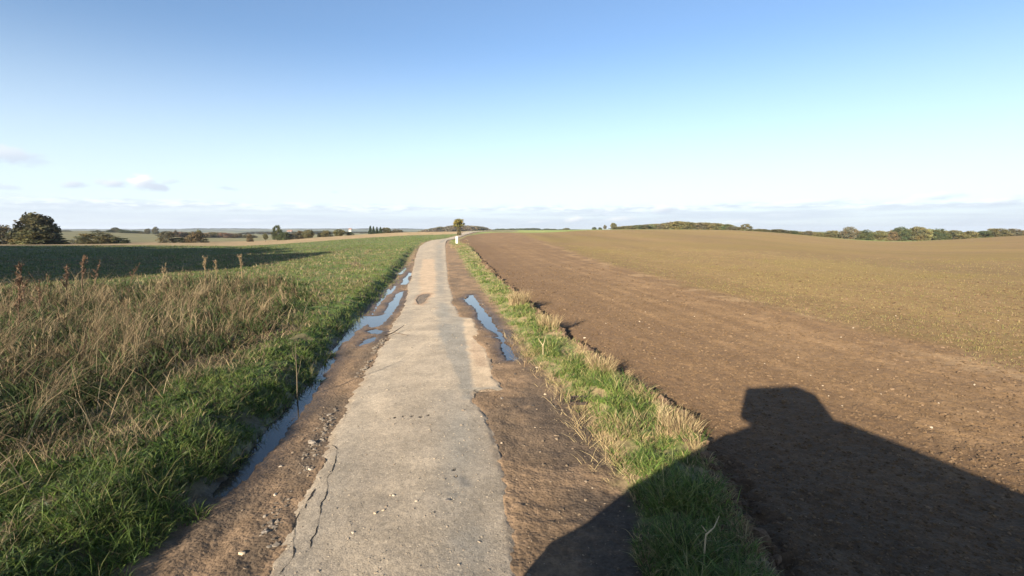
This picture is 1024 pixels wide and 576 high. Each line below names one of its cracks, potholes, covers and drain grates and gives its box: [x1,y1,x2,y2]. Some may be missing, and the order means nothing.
crack [279,445,337,574]
